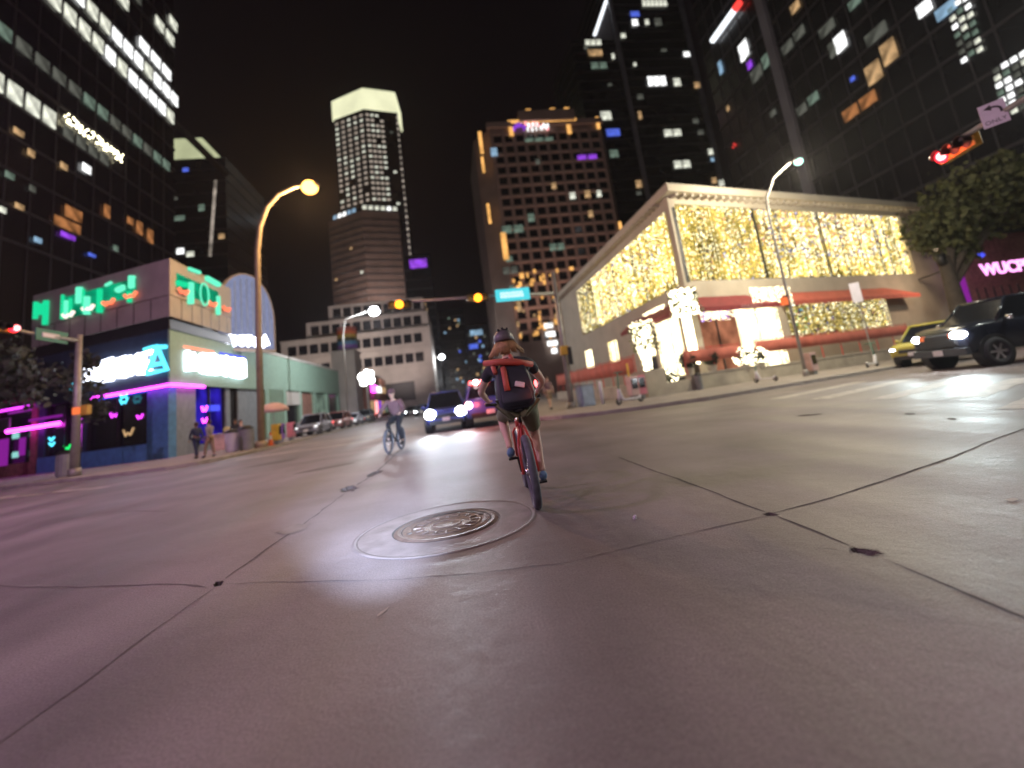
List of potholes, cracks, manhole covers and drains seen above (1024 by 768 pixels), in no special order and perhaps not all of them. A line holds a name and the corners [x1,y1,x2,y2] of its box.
pothole [849,546,885,557]
manhole cover [352,500,536,559]
